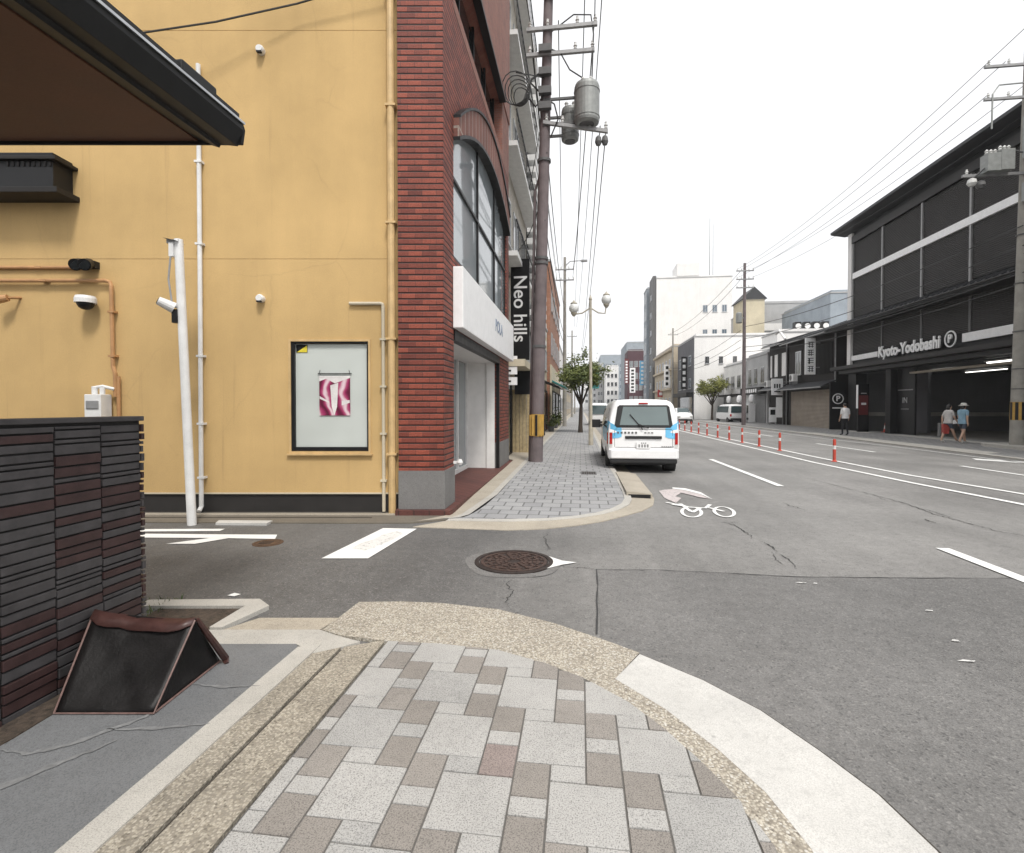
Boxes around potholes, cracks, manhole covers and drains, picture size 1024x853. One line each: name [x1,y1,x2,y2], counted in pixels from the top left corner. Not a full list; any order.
manhole cover [475,550,553,574]
crack [807,478,1022,536]
manhole cover [252,539,284,547]
